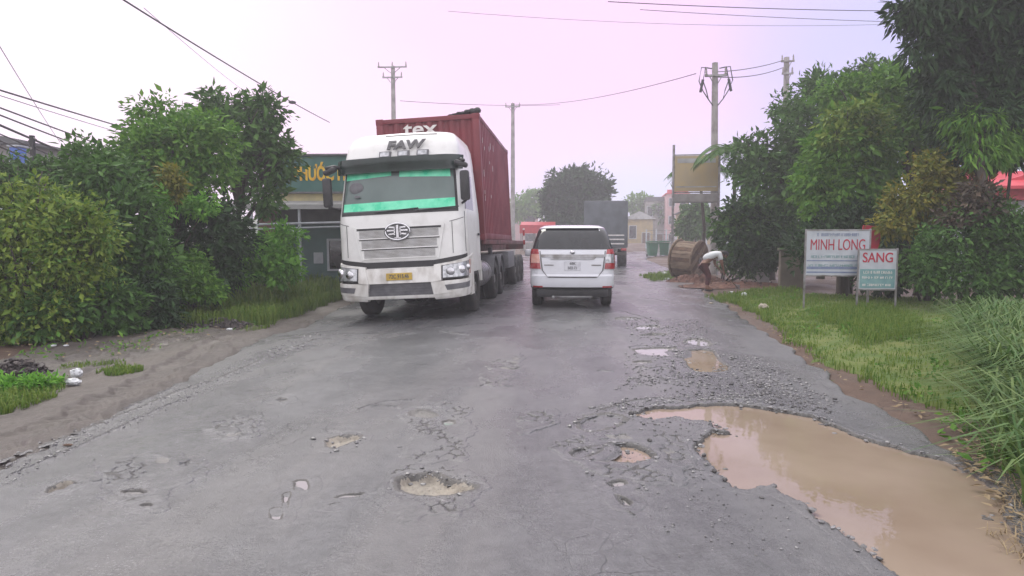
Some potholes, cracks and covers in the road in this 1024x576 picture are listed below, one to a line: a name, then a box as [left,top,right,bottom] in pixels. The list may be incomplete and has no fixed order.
pothole [624,344,692,359]
pothole [572,441,662,465]
pothole [310,432,374,453]
pothole [253,503,298,527]
pothole [622,400,1024,576]
pothole [381,466,491,500]
crack [0,338,321,514]
crack [358,352,526,523]
pothole [268,487,304,517]
pothole [279,475,323,497]
